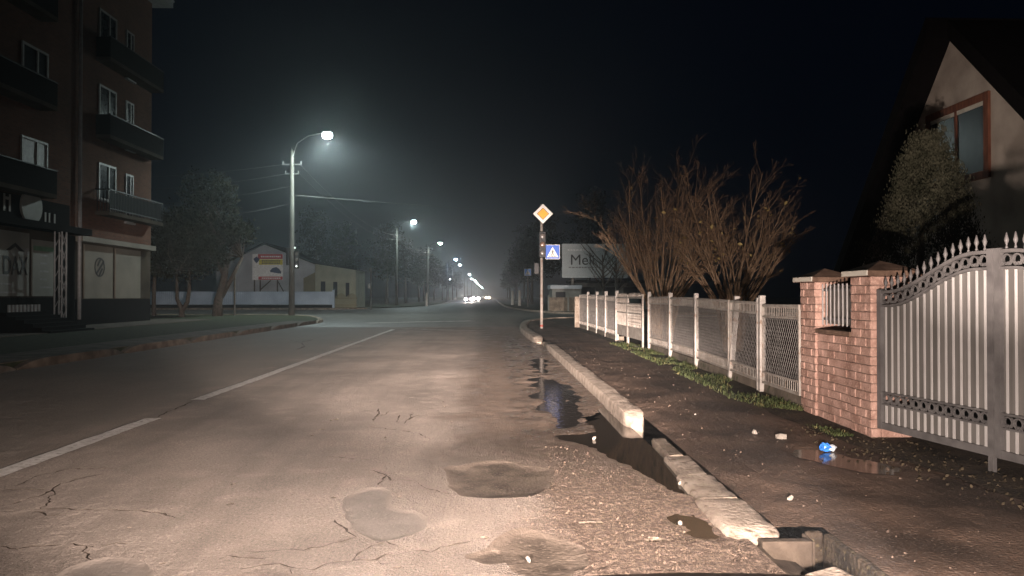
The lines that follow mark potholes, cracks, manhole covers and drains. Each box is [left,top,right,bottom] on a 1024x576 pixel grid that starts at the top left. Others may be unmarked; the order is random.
crack [222,519,473,574]
pothole [465,528,589,576]
pothole [56,557,155,576]
crack [367,409,431,445]
pothole [342,487,428,541]
crack [332,456,453,496]
crack [2,468,181,519]
pothole [444,460,554,498]
crack [3,543,127,560]
